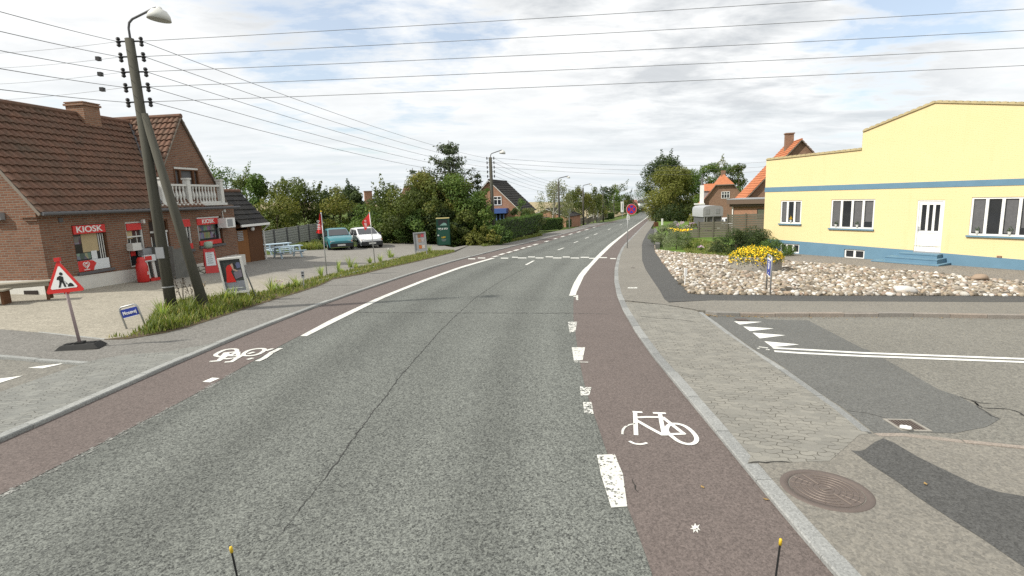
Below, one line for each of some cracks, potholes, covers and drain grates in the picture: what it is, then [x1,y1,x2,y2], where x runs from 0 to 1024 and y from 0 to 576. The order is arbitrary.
crack [256,270,593,566]
manhole cover [780,469,876,513]
crack [960,396,1024,419]
